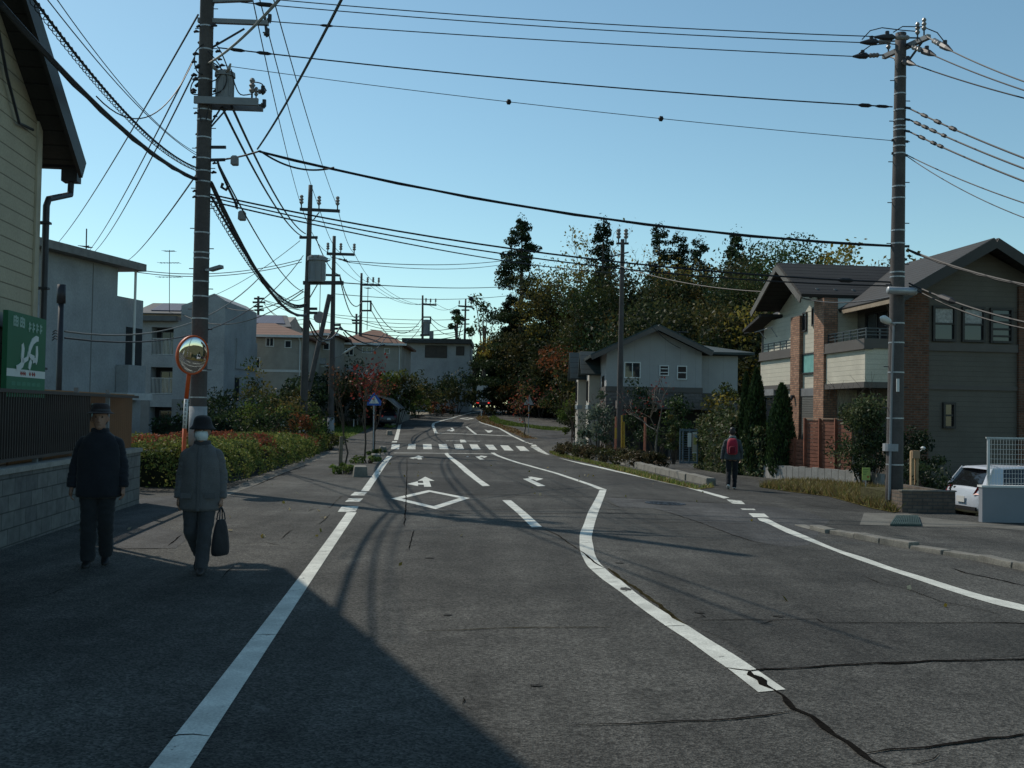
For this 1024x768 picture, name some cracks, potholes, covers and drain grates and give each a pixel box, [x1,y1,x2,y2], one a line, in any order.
crack [395,474,414,548]
drain grate [890,515,921,526]
crack [579,658,1024,768]
